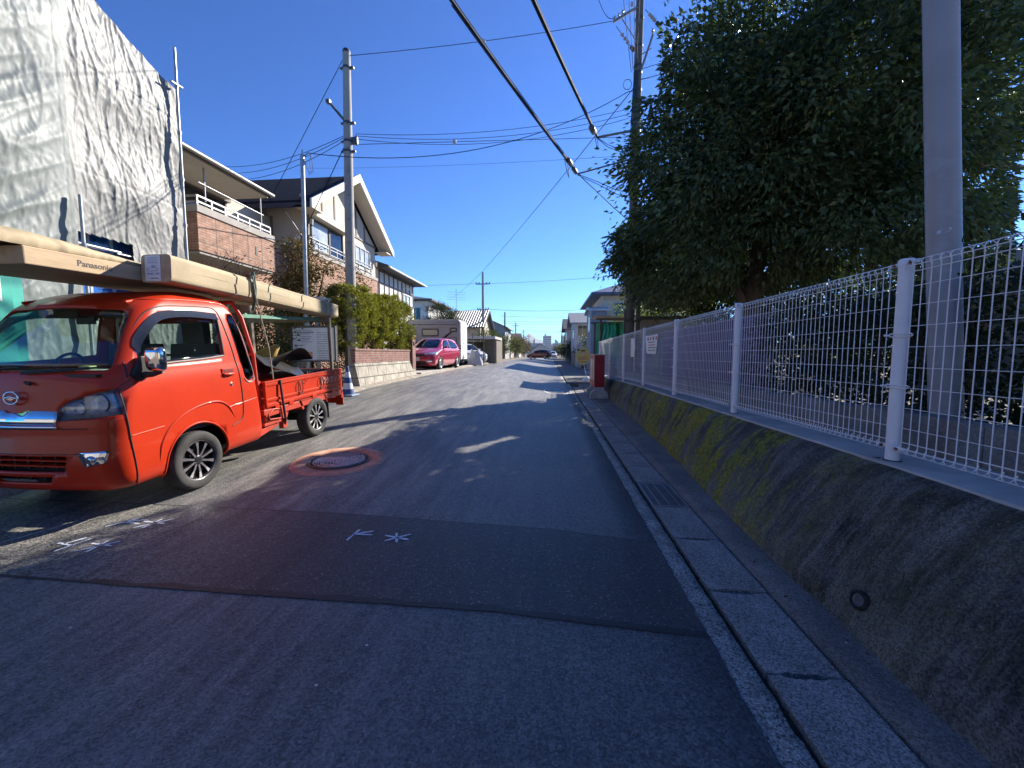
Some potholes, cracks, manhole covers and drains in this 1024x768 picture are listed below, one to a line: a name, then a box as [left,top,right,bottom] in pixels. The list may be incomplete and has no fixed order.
manhole cover [288,447,386,476]
drain grate [637,483,689,509]
